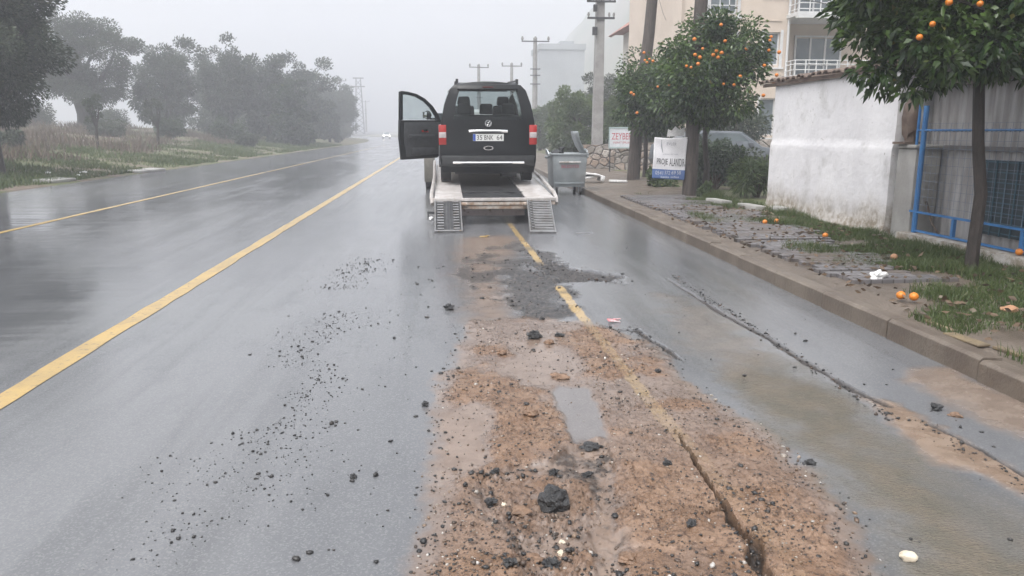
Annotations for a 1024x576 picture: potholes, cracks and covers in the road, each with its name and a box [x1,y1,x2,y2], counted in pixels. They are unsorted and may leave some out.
crack [674,430,775,576]
